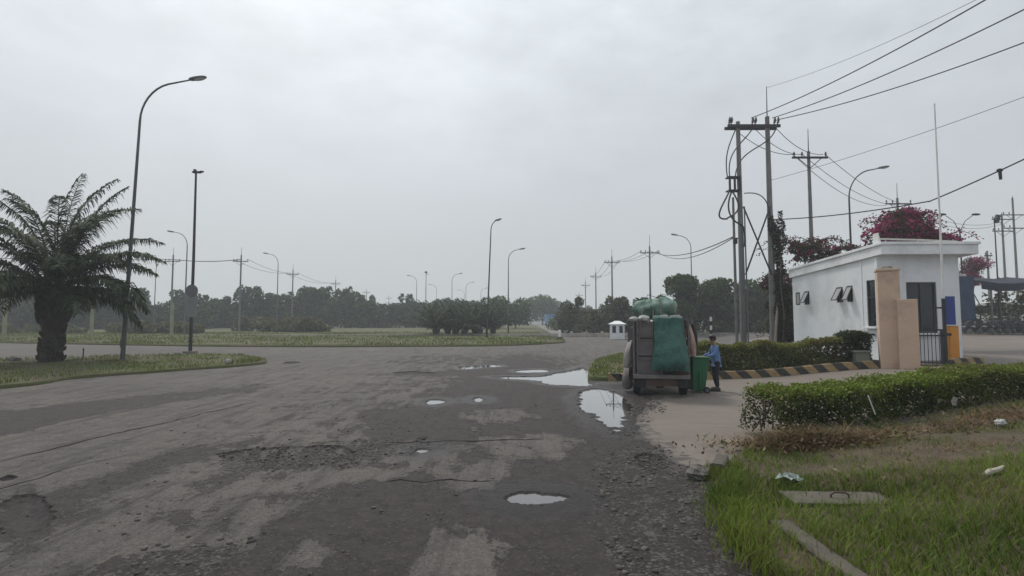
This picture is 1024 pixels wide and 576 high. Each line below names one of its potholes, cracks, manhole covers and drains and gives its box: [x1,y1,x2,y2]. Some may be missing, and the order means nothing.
pothole [0,493,59,538]
pothole [216,445,359,469]
manhole cover [779,491,886,508]
pothole [503,491,572,505]
pothole [491,367,597,386]
pothole [574,388,636,433]
